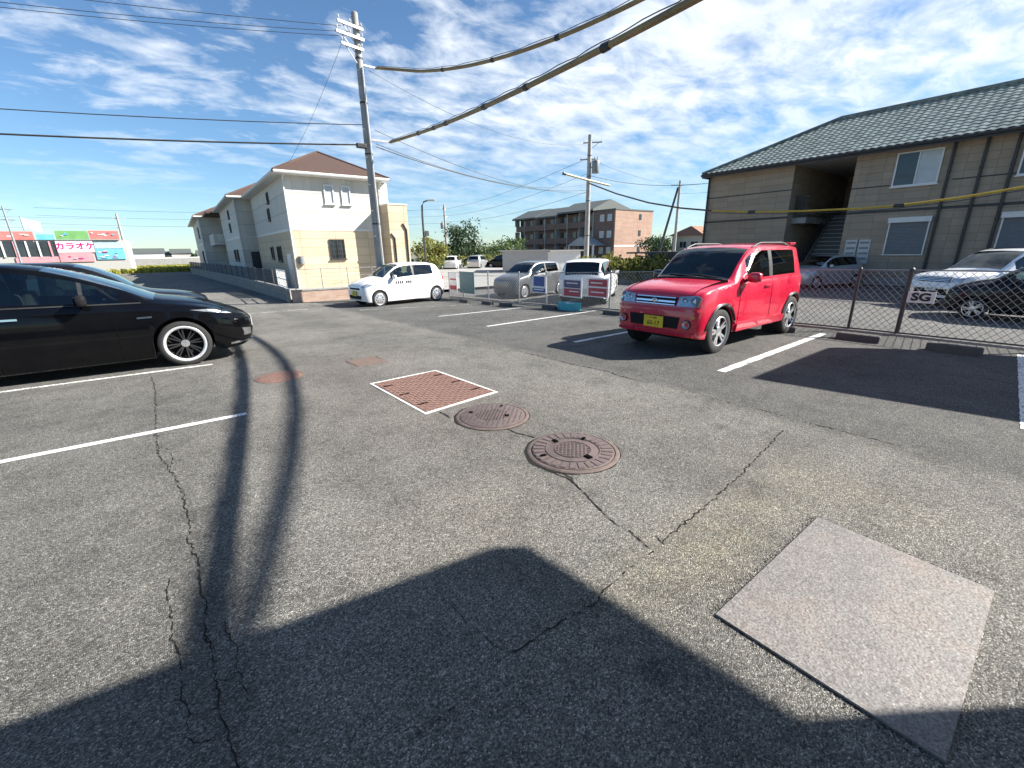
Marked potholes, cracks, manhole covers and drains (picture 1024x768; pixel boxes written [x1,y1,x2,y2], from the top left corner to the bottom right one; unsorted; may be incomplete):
manhole cover [525,432,621,475]
crack [412,430,784,740]
manhole cover [454,403,530,431]
crack [149,374,249,768]
